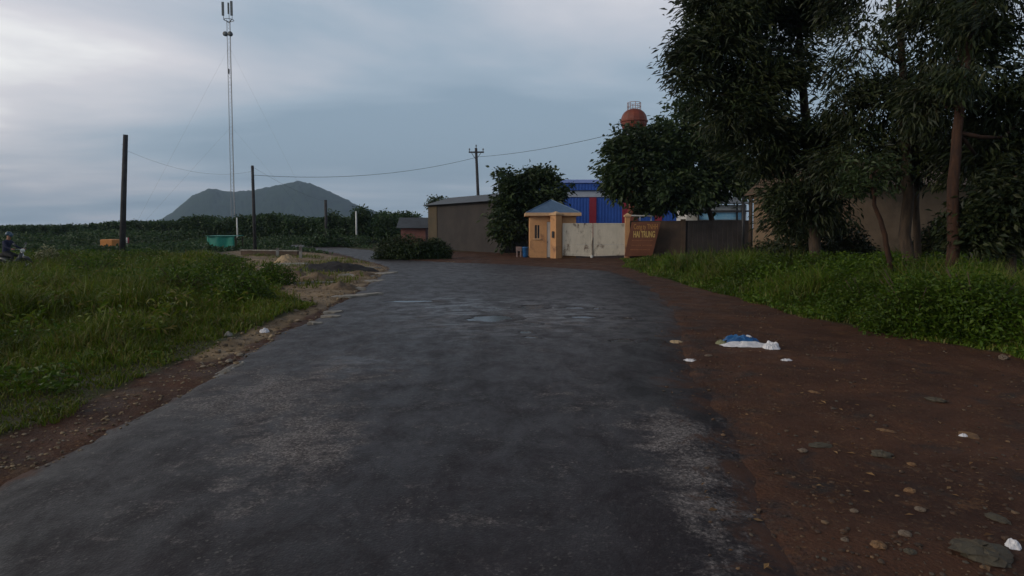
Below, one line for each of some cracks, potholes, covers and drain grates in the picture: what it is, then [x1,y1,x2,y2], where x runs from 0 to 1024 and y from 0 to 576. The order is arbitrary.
pothole [454,314,526,323]
